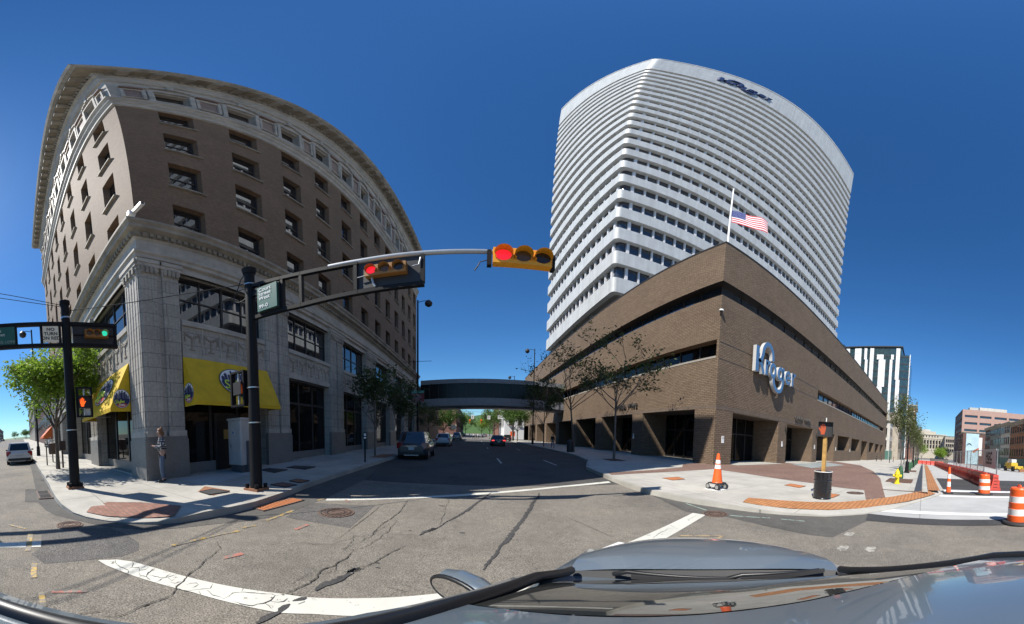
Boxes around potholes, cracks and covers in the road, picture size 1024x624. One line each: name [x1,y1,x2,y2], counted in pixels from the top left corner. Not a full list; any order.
crack [78,500,413,617]
manhole cover [56,521,83,529]
manhole cover [318,508,354,518]
drain grate [36,490,54,499]
